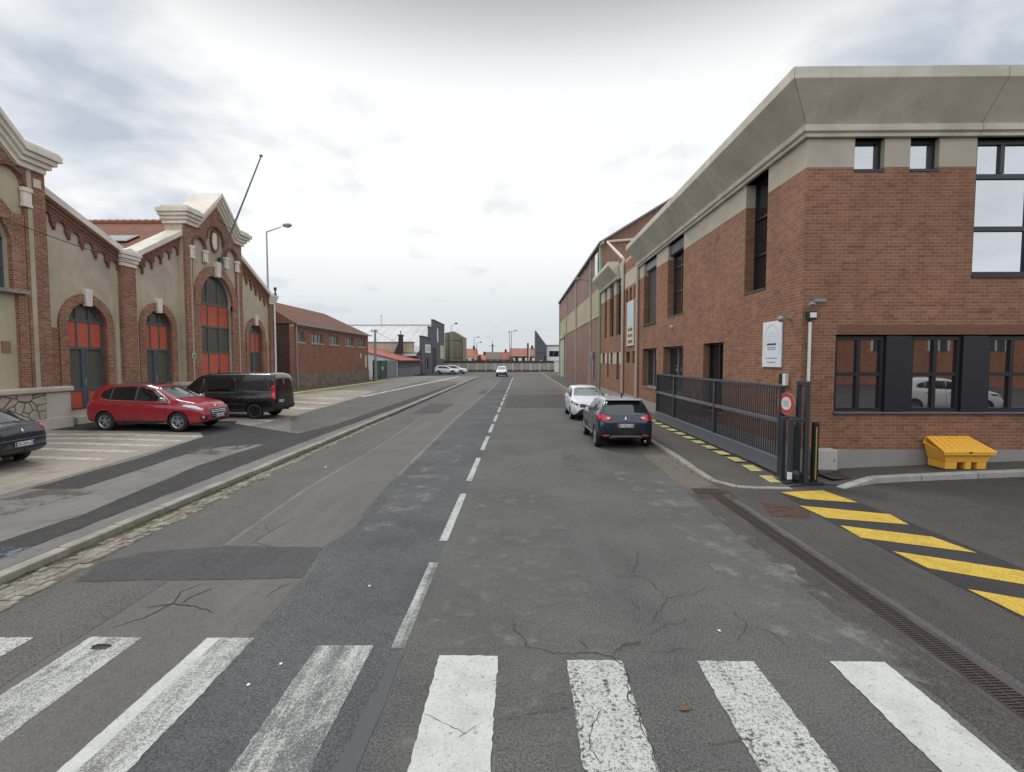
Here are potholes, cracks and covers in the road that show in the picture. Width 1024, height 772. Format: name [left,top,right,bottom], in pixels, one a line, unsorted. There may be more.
drain grate [706,494,1024,725]
crack [115,583,211,627]
crack [513,551,705,772]
